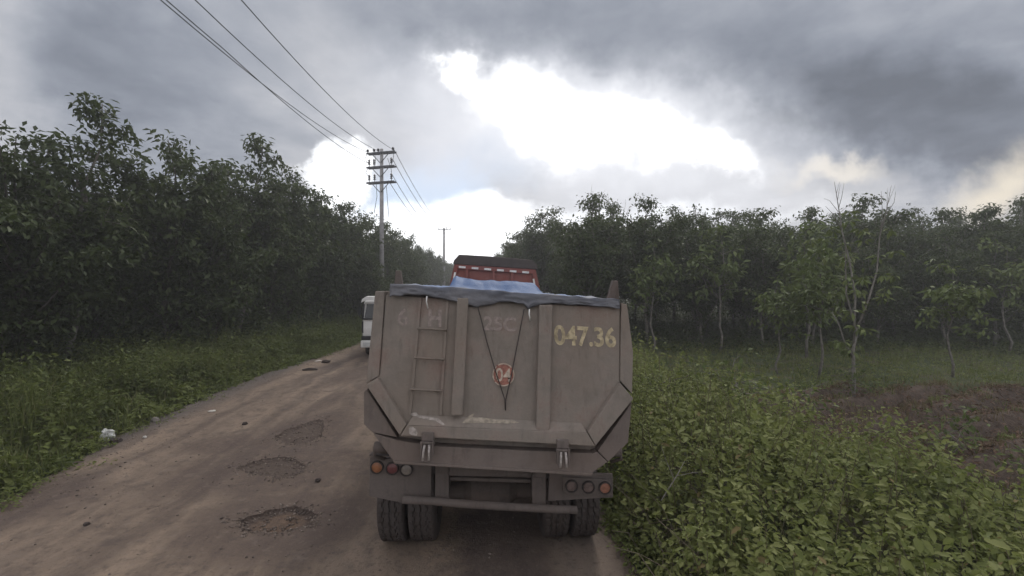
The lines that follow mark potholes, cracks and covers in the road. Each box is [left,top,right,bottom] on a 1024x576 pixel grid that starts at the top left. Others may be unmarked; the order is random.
pothole [240,457,305,479]
pothole [275,420,324,444]
pothole [238,506,318,532]
